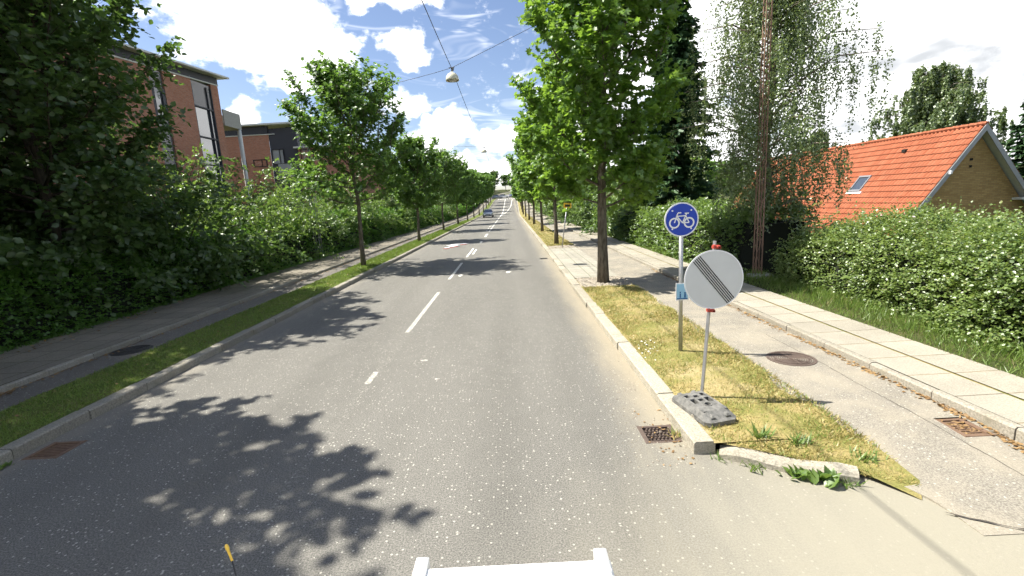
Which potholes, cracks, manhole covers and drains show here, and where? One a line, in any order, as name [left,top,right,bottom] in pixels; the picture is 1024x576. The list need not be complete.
manhole cover [109,345,153,356]
manhole cover [766,351,817,366]
